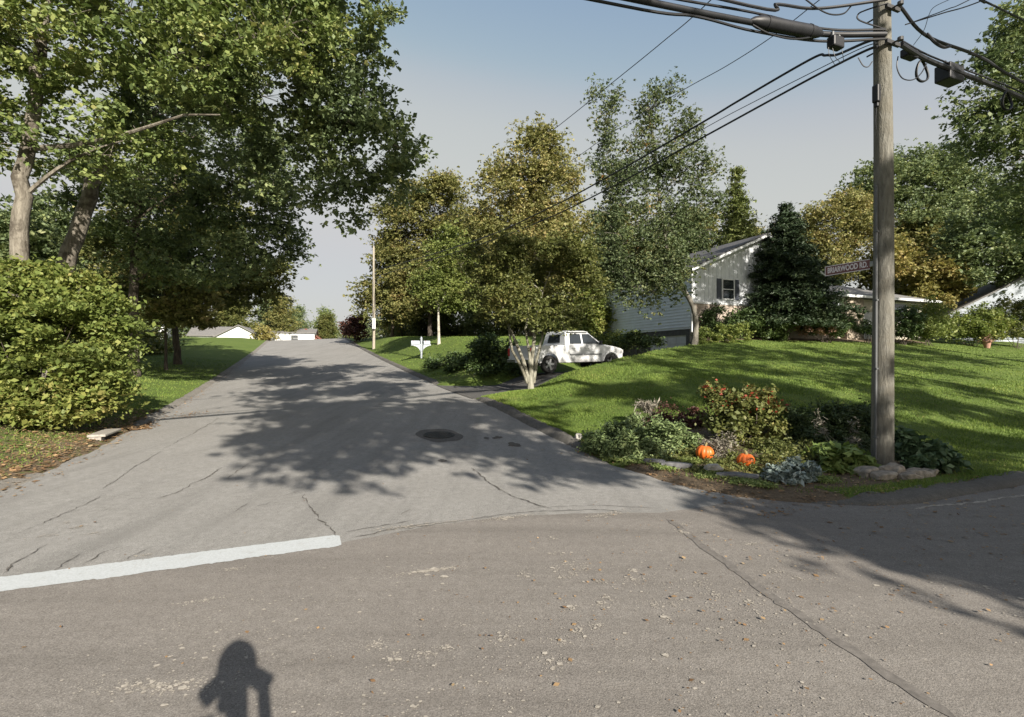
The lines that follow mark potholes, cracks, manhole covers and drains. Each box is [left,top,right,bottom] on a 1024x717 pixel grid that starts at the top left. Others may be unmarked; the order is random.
crack [472,468,549,508]
crack [287,491,336,536]
crack [915,495,1024,509]
crack [6,418,218,572]
